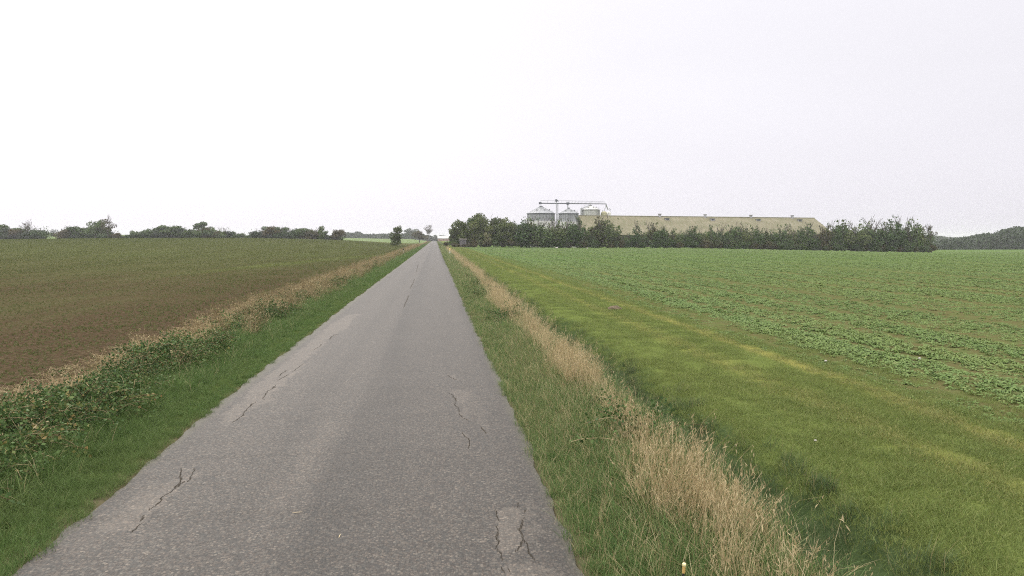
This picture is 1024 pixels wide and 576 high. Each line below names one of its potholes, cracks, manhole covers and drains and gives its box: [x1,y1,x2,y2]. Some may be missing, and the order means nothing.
crack [131,468,195,532]
crack [232,334,337,423]
crack [449,376,488,448]
